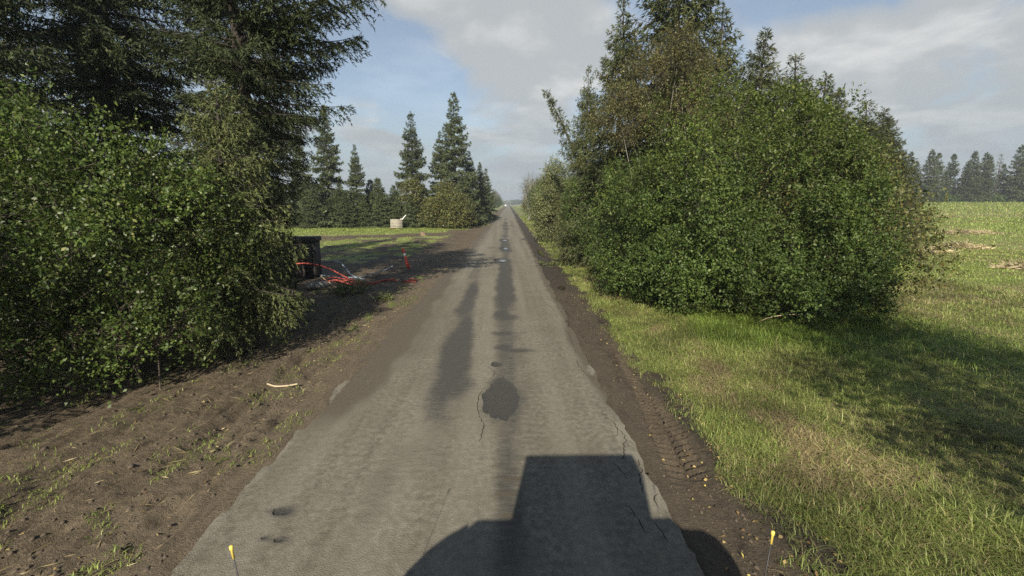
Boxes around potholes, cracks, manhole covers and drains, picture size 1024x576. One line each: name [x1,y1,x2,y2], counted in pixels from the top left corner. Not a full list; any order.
crack [602,412,668,542]
pothole [272,507,292,515]
crack [476,367,495,441]
pothole [481,377,520,422]
